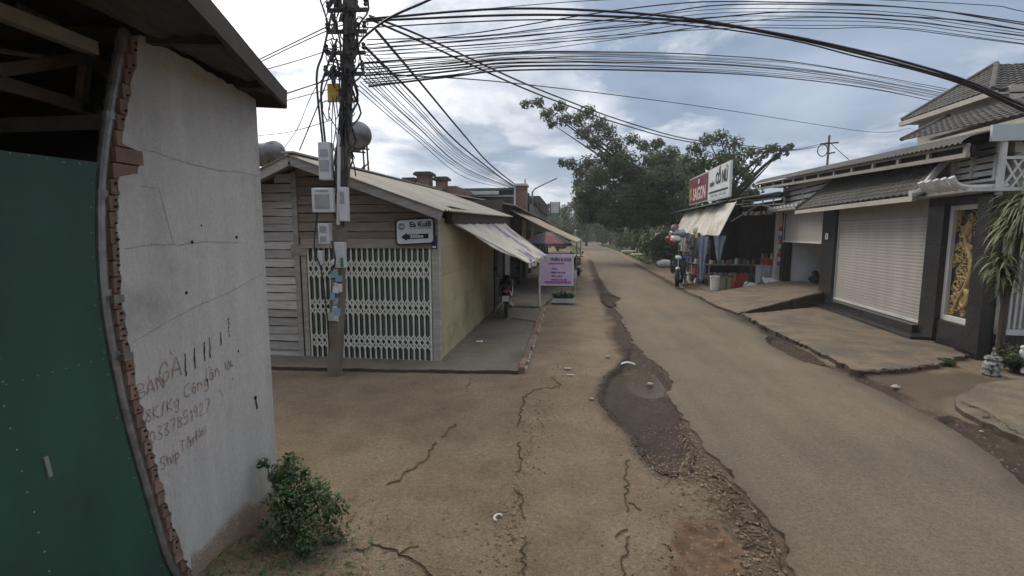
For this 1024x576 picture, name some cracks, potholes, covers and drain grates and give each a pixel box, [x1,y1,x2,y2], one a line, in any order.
crack [515,377,561,576]
crack [615,459,641,576]
pothole [765,336,826,366]
crack [356,544,433,576]
pothole [596,342,698,477]
crack [386,377,471,485]
pothole [601,294,620,307]
